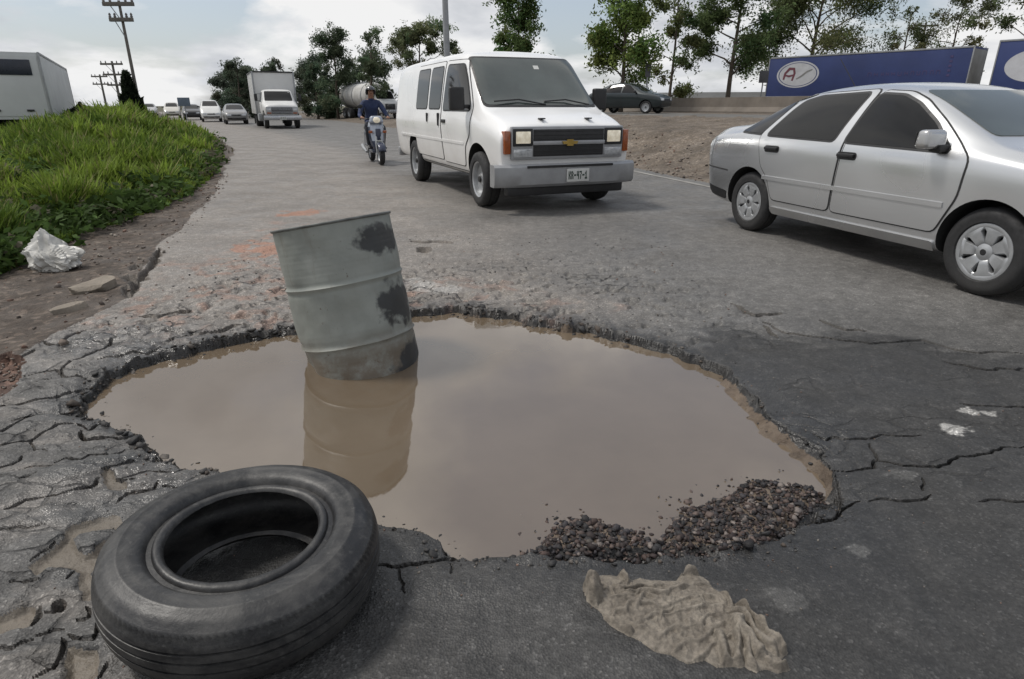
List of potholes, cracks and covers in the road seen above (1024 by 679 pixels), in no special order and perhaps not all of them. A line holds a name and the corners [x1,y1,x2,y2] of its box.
crack [97,661,110,679]
crack [0,606,100,679]
crack [730,303,1024,371]
crack [804,433,1024,526]
pothole [77,305,842,564]
crack [378,556,462,594]
crack [0,248,246,584]
